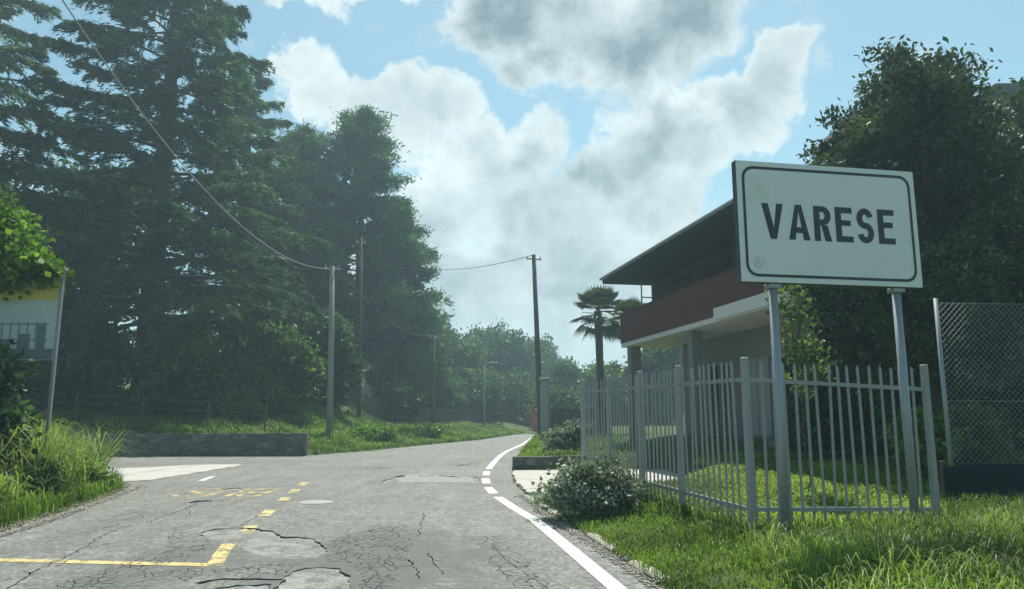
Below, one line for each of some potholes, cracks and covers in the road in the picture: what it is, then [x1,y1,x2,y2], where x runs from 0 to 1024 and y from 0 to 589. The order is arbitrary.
crack [327,513,444,589]
crack [6,498,293,589]
crack [476,535,550,589]
